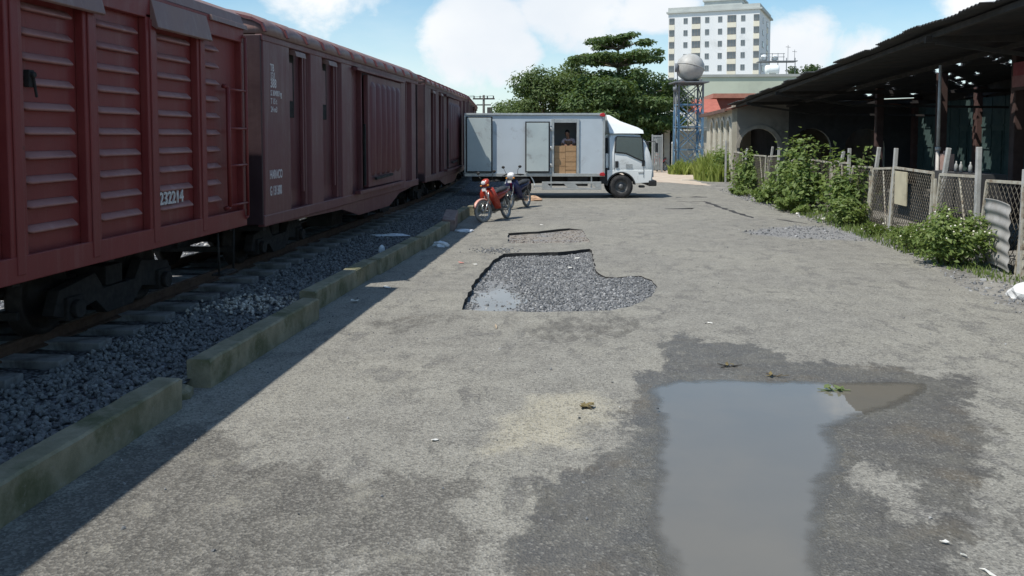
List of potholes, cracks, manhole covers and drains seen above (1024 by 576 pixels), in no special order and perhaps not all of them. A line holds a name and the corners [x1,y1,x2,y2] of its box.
pothole [507,228,590,243]
crack [669,196,754,218]
pothole [462,249,657,312]
